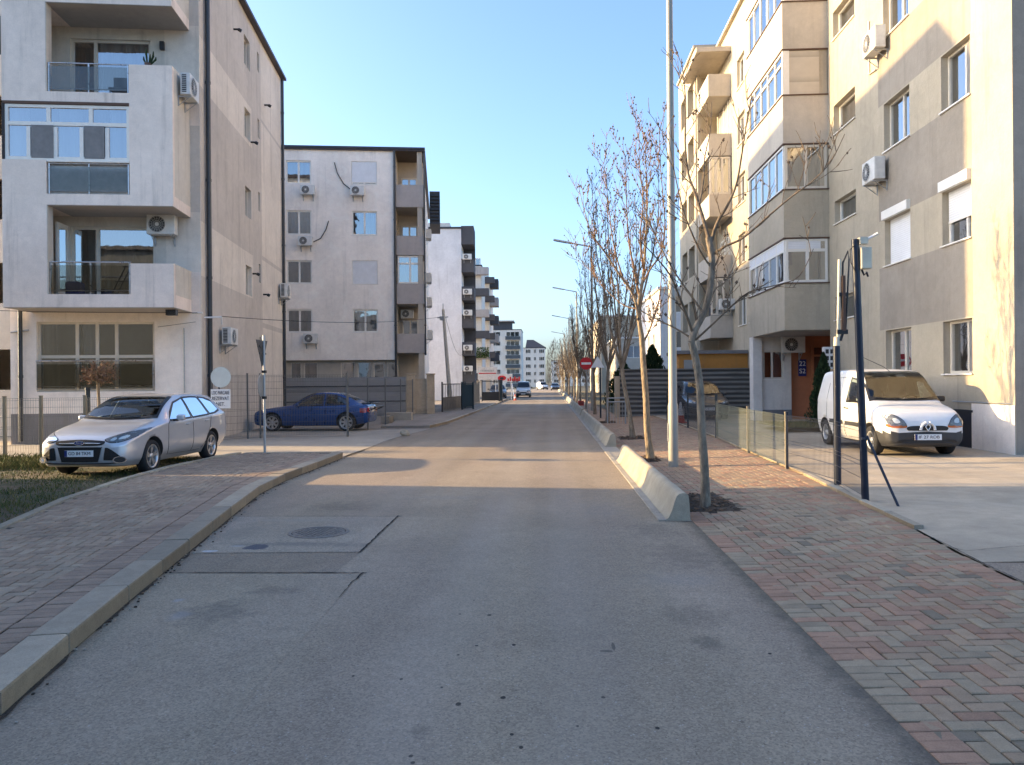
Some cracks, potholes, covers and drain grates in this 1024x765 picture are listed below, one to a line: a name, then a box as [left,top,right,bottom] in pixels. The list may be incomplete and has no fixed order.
manhole cover [287,526,349,538]
